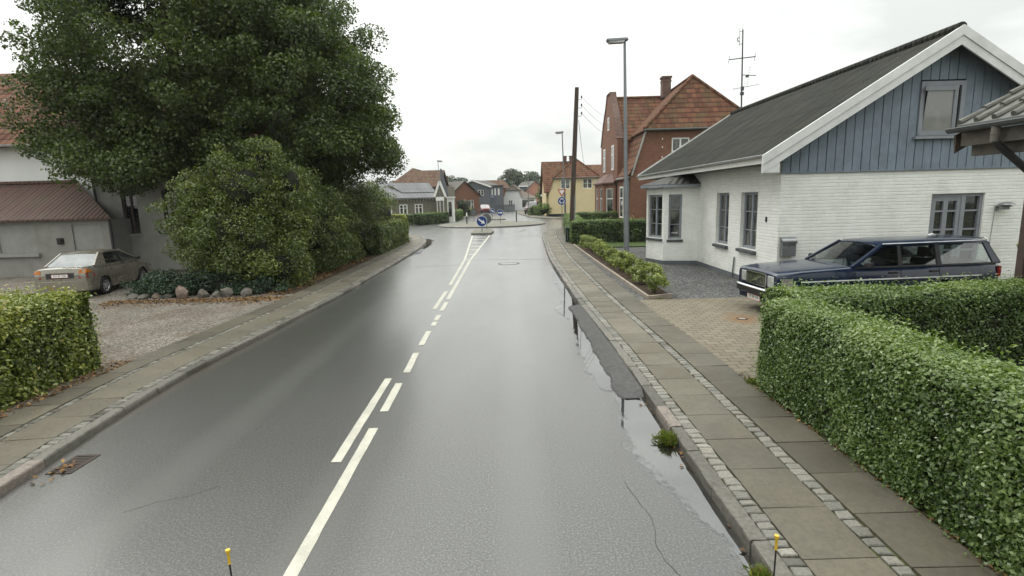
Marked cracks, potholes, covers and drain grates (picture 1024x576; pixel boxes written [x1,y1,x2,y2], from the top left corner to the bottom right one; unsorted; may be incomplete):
drain grate [45,454,101,475]
